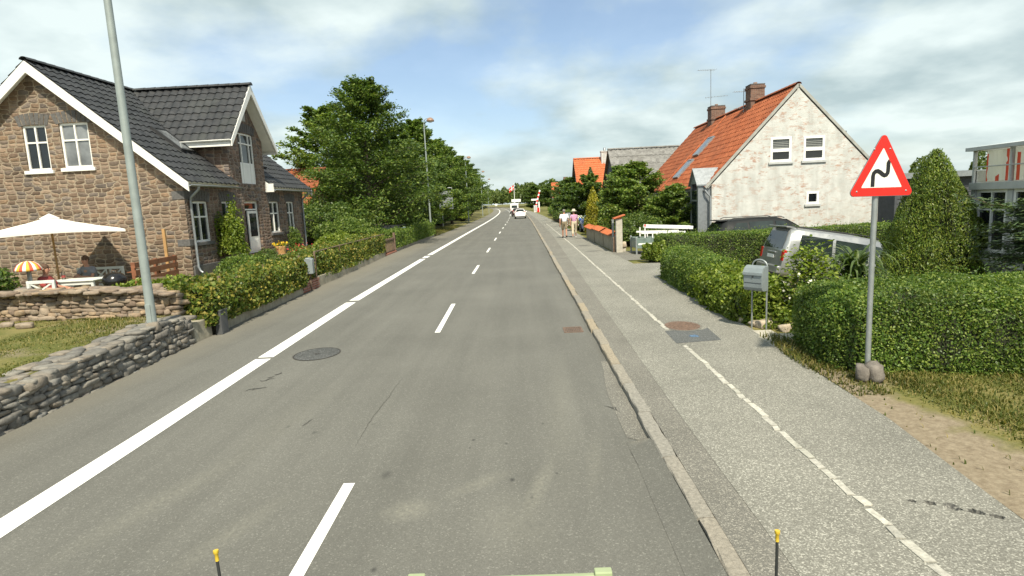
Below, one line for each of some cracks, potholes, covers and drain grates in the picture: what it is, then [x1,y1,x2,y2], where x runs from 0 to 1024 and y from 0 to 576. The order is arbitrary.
manhole cover [663,321,702,331]
manhole cover [293,347,341,361]
